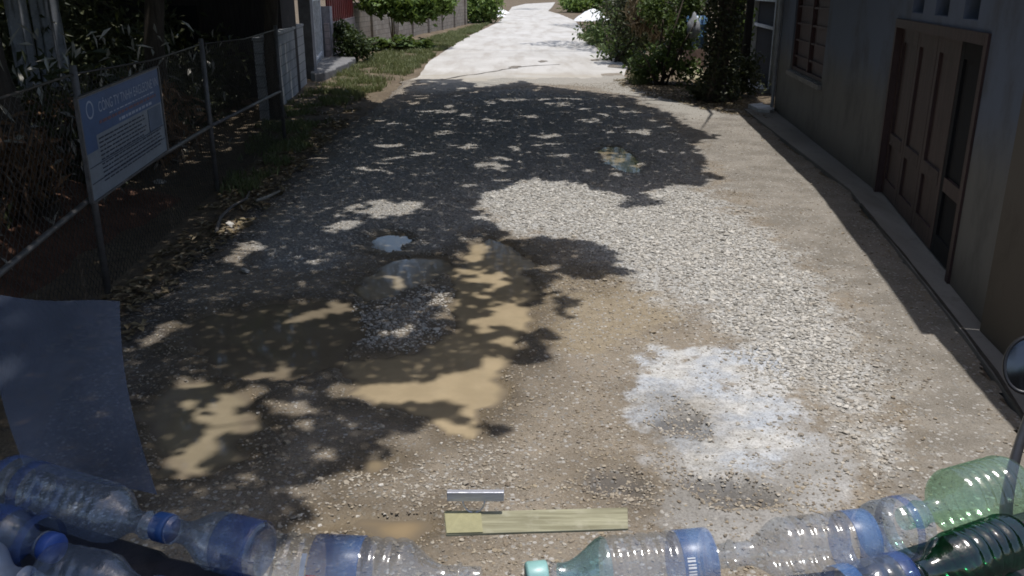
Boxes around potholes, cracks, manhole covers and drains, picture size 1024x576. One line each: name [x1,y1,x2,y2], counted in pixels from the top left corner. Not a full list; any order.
pothole [586,144,651,174]
pothole [131,372,292,487]
pothole [319,230,567,447]
pothole [151,294,385,386]
